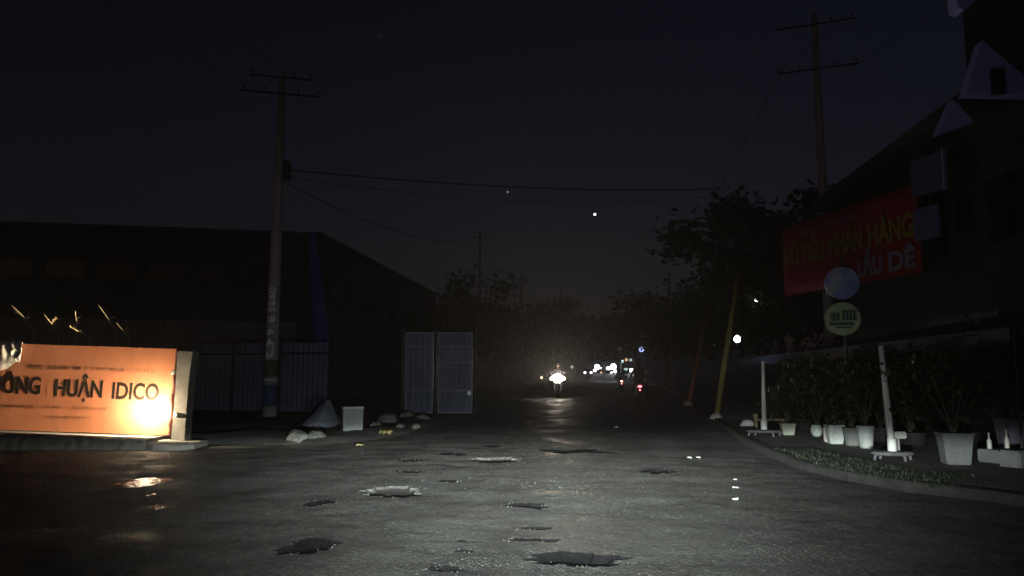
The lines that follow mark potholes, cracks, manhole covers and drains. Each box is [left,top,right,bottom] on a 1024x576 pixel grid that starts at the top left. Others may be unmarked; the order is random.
pothole [275,538,342,555]
pothole [301,498,336,507]
pothole [504,502,548,510]
pothole [359,486,425,498]
pothole [422,564,466,572]
pothole [522,548,639,567]
